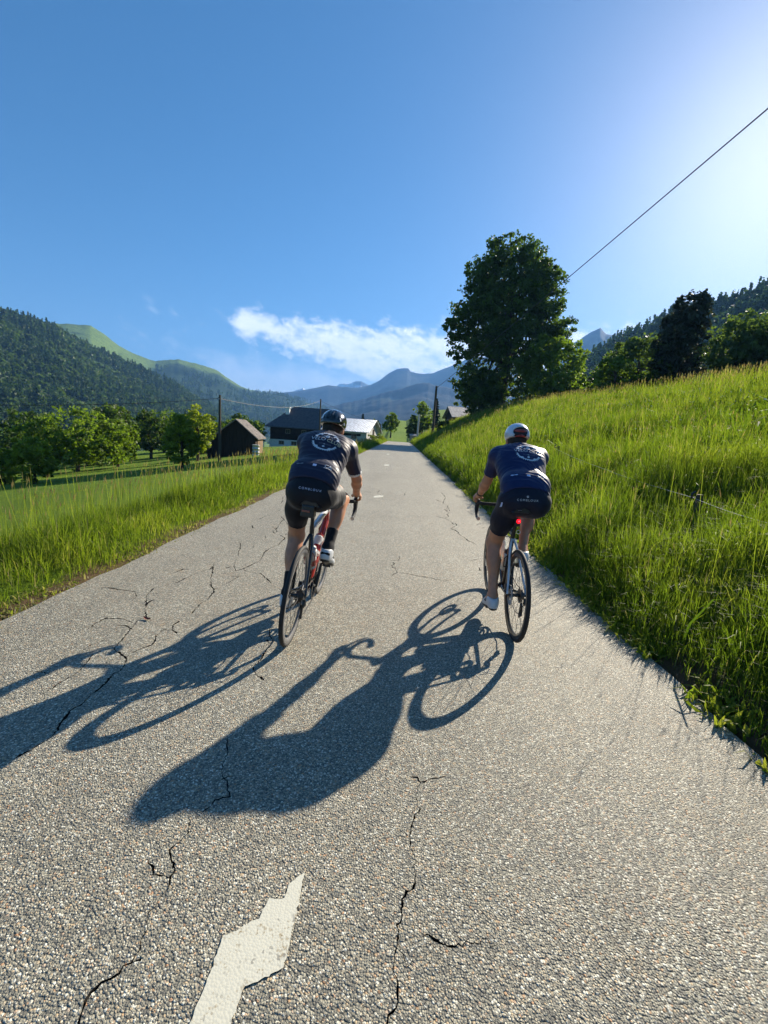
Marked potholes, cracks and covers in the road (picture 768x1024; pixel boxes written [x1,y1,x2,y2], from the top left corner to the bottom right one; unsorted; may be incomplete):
crack [16,496,288,758]
crack [77,739,232,1024]
crack [386,776,497,1024]
